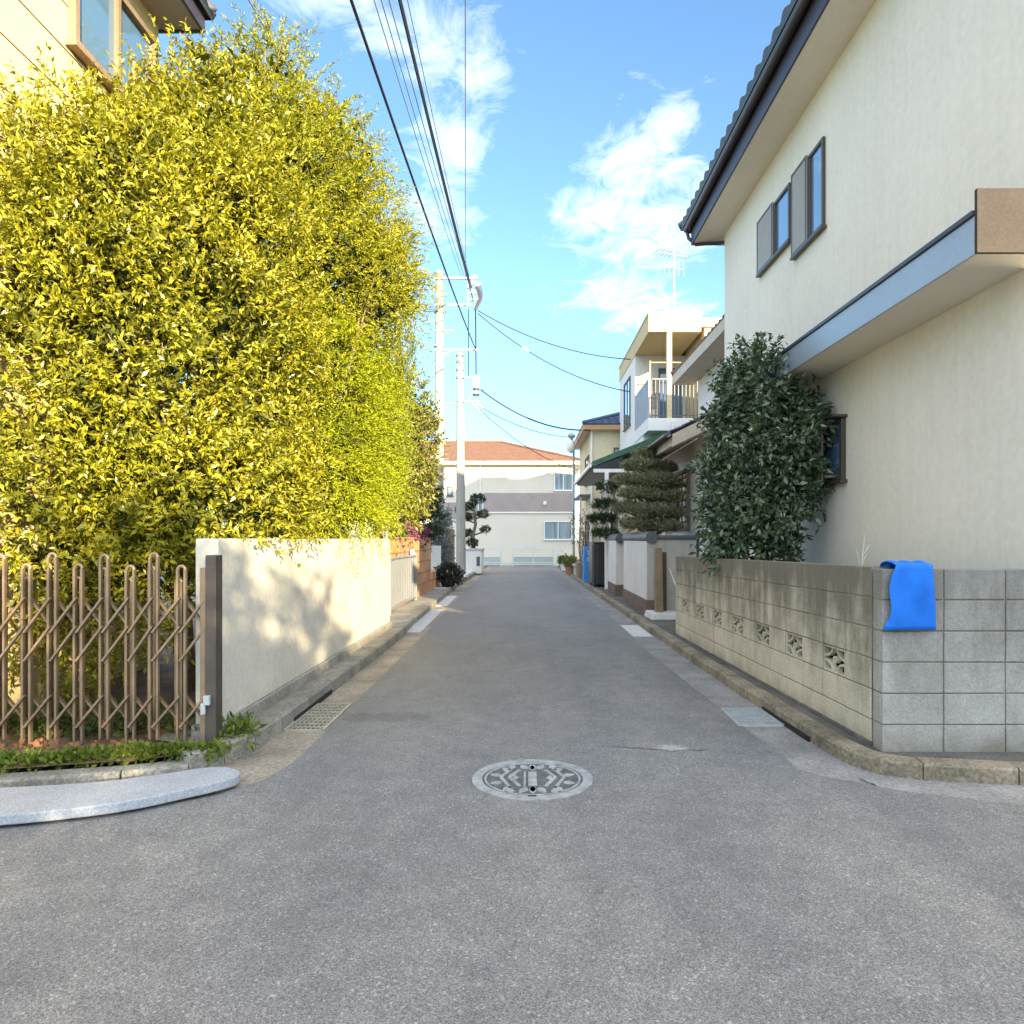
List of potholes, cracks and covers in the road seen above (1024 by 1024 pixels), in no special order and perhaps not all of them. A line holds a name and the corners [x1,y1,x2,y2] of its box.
drain grate [284,703,352,732]
drain grate [294,689,332,721]
drain grate [721,708,784,727]
manhole cover [472,759,593,801]
